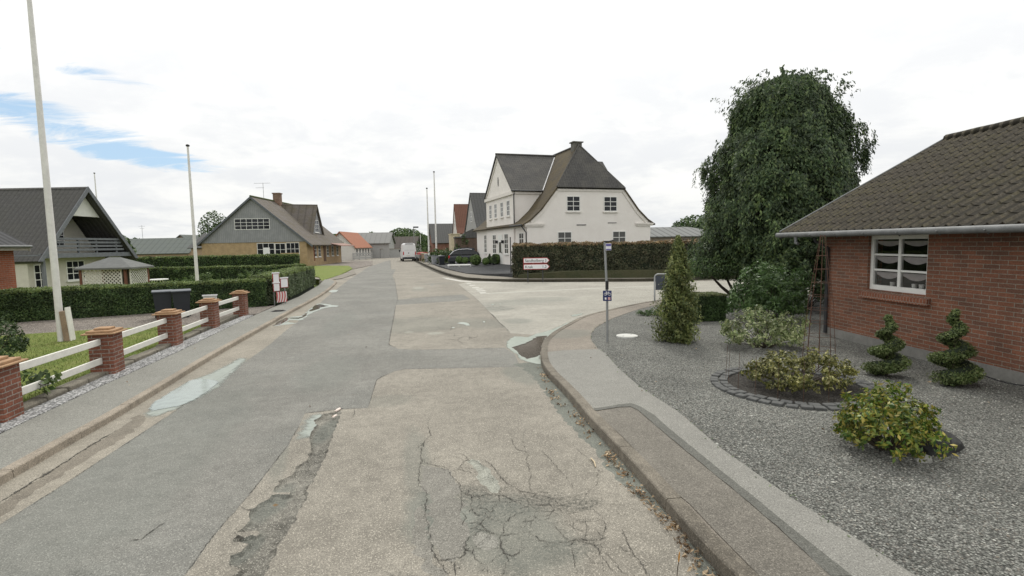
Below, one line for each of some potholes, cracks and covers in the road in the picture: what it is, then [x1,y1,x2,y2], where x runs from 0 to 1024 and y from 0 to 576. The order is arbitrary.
pothole [229,411,342,576]
pothole [512,336,547,359]
crack [418,426,650,575]
